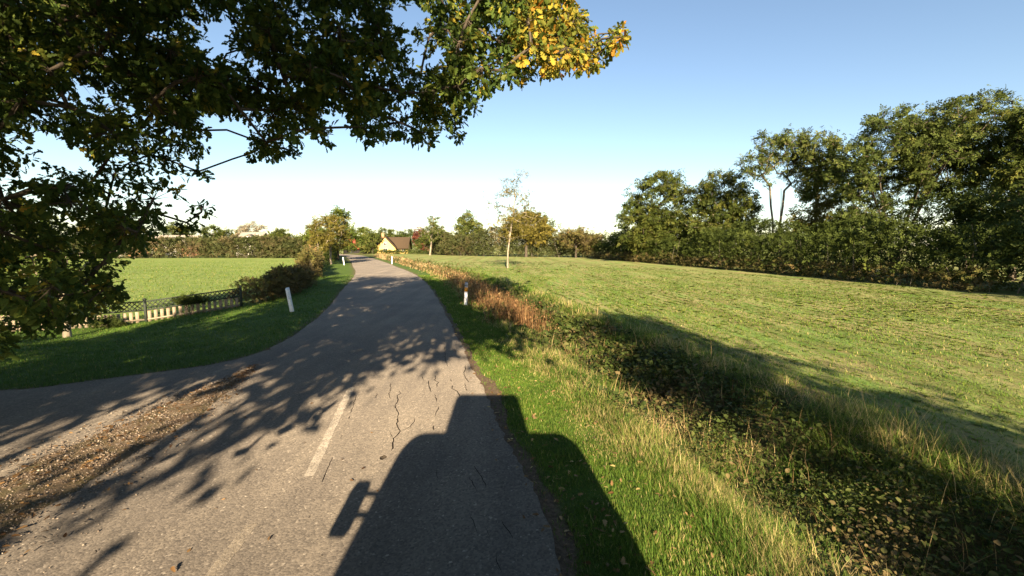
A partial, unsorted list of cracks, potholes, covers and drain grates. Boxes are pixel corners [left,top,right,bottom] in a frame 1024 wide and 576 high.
crack [366,383,415,449]
crack [422,347,469,430]
